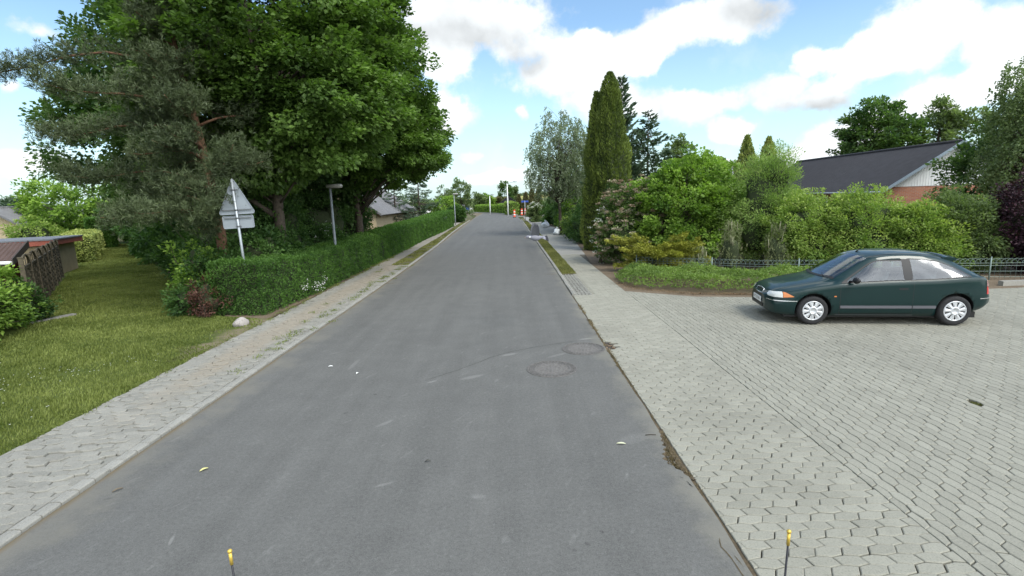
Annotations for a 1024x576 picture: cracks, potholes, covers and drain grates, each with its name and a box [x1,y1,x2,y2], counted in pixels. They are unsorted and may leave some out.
manhole cover [562,342,605,355]
manhole cover [526,360,577,378]
